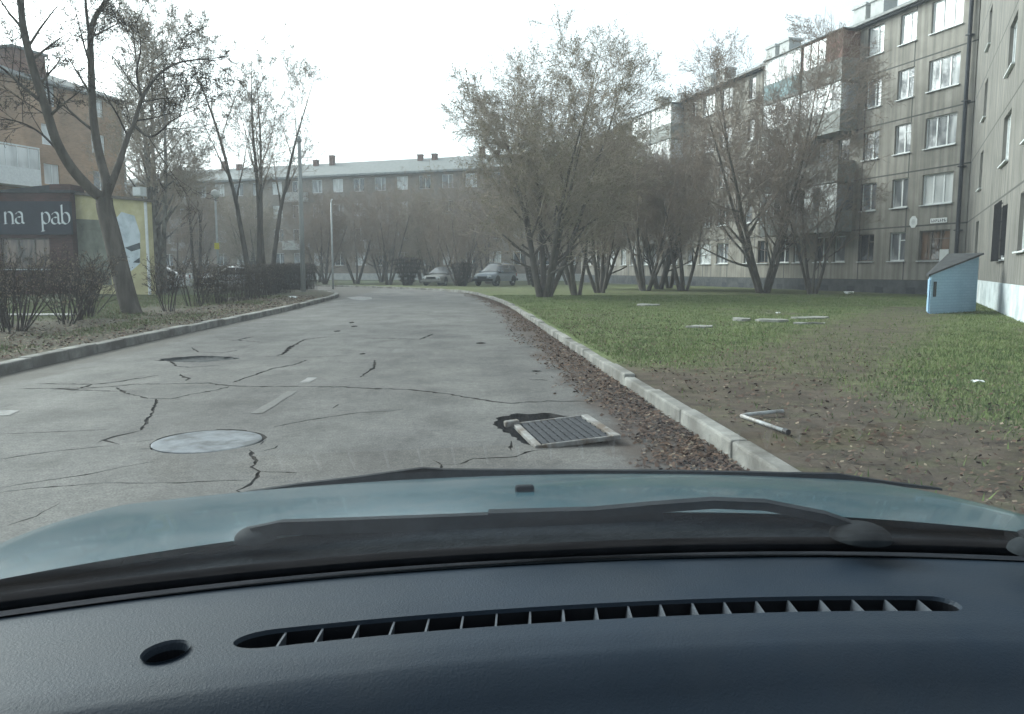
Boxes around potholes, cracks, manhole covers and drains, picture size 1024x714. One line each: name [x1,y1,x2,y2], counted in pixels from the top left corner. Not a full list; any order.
manhole cover [149,429,267,454]
crack [4,337,595,525]
drain grate [504,414,621,448]
